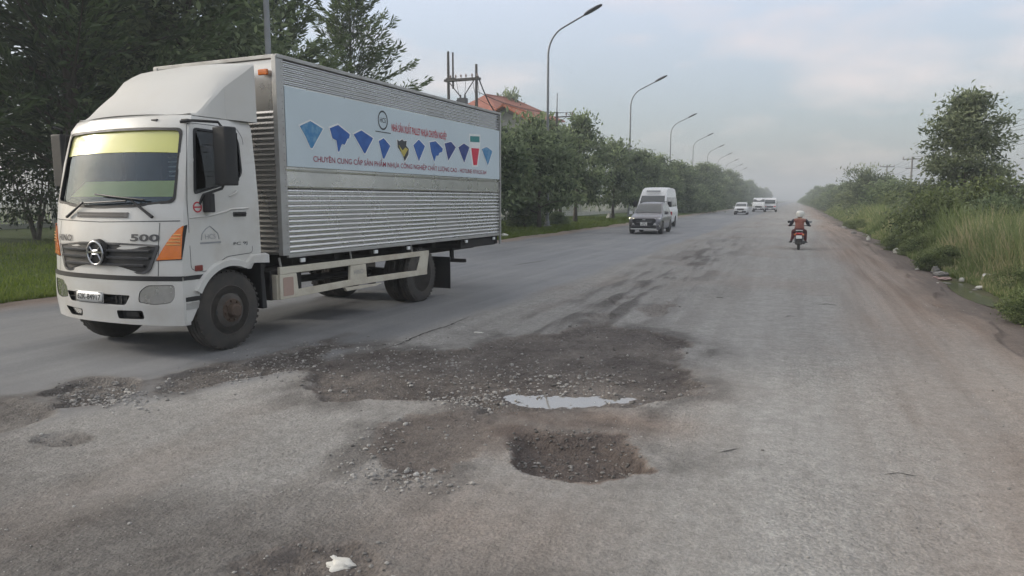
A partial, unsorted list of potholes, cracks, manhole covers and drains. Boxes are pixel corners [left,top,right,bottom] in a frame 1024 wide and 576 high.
crack [377,316,469,351]
pothole [503,426,663,484]
pothole [301,320,716,417]
pothole [36,375,151,409]
pothole [19,428,104,450]
pothole [361,410,510,486]
